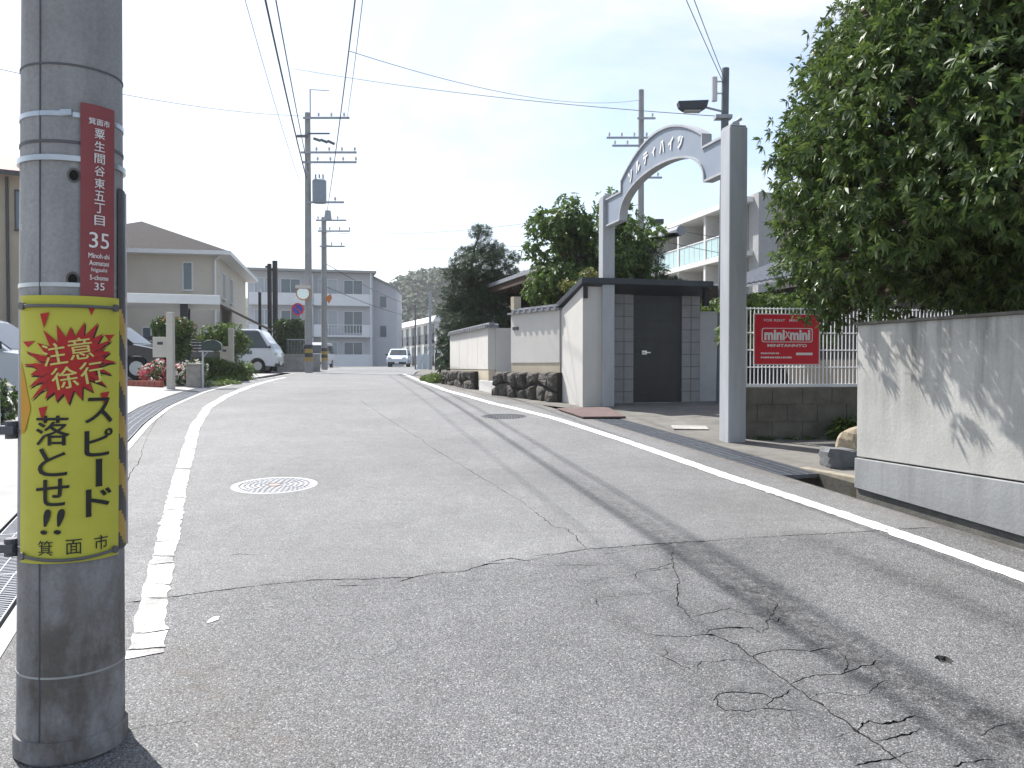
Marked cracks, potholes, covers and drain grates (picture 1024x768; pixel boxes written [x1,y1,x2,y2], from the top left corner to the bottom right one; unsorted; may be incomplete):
manhole cover [230,477,318,494]
pothole [934,655,955,664]
drain grate [0,533,17,574]
drain grate [1,517,17,534]
crack [366,404,588,549]
drain grate [0,573,17,628]
